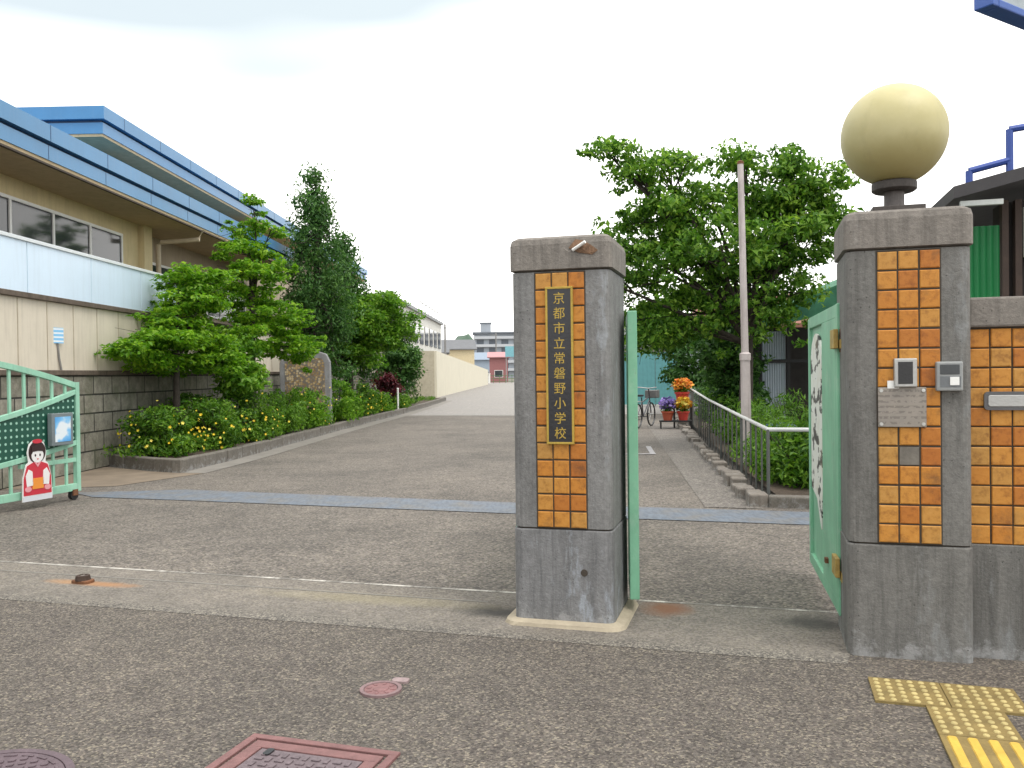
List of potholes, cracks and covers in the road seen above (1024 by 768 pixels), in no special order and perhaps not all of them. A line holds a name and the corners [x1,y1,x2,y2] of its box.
manhole cover [205,733,401,768]
manhole cover [359,677,410,698]
manhole cover [0,749,75,768]
